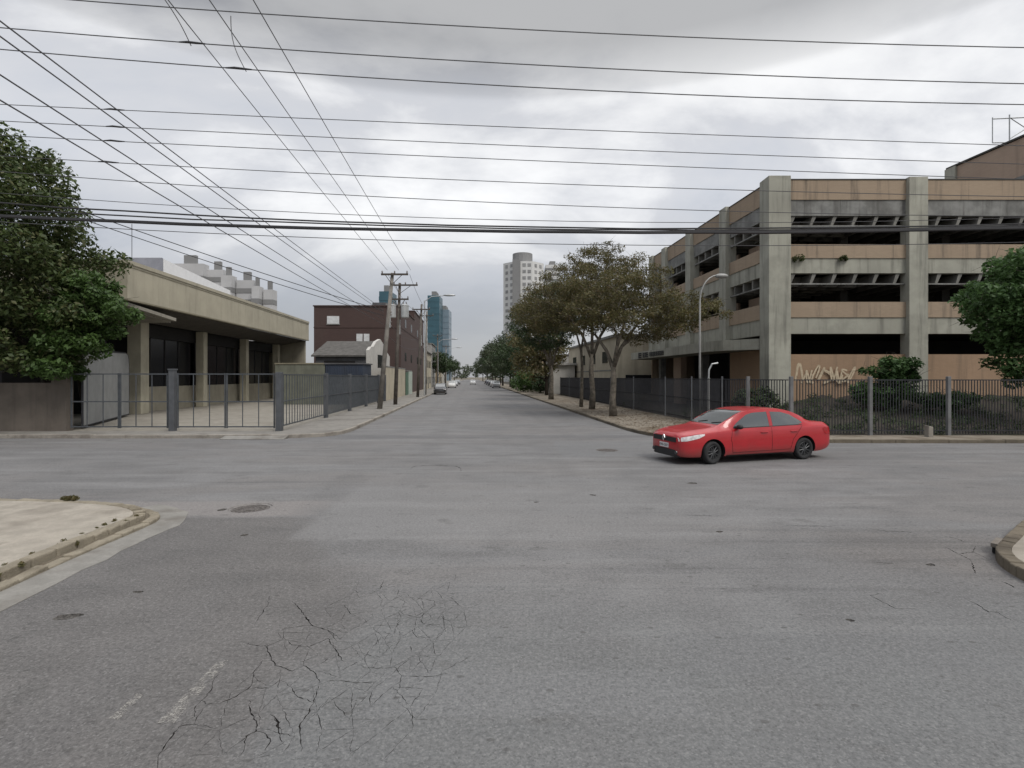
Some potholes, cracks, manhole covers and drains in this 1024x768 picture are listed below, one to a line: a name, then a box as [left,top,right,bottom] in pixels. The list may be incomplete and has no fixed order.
manhole cover [228,503,273,513]
crack [157,566,478,768]
